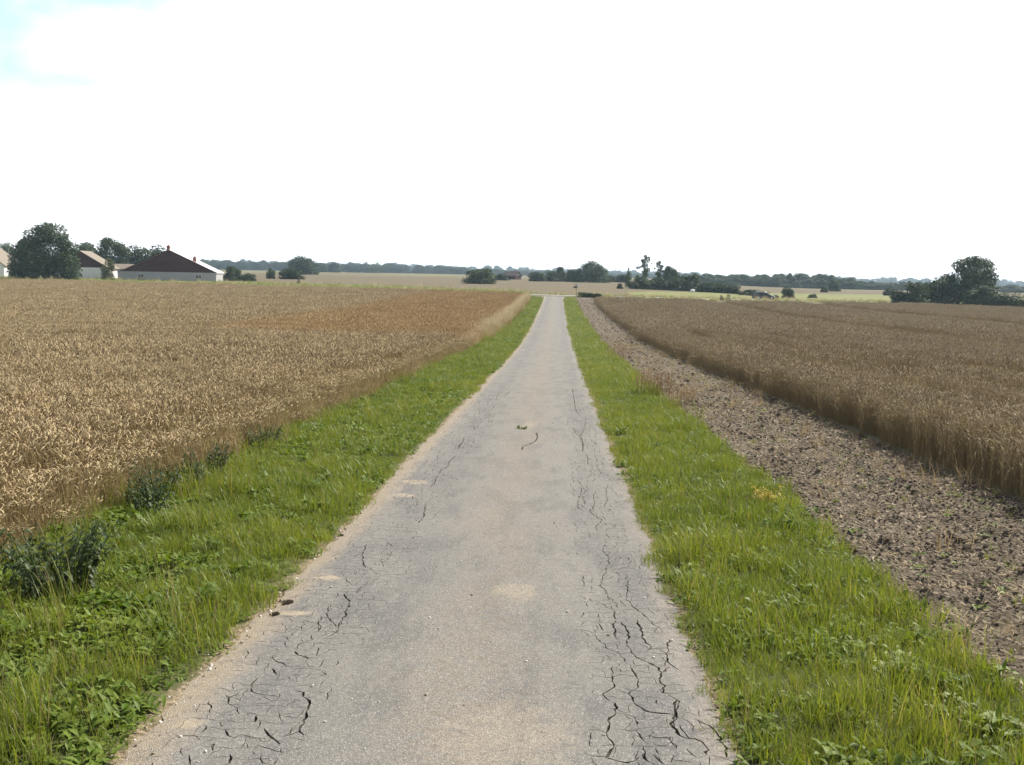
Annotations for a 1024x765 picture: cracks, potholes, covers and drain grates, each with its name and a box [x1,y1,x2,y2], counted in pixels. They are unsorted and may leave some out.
crack [565,389,639,544]
crack [574,541,733,765]
crack [288,394,507,632]
crack [151,621,369,765]
